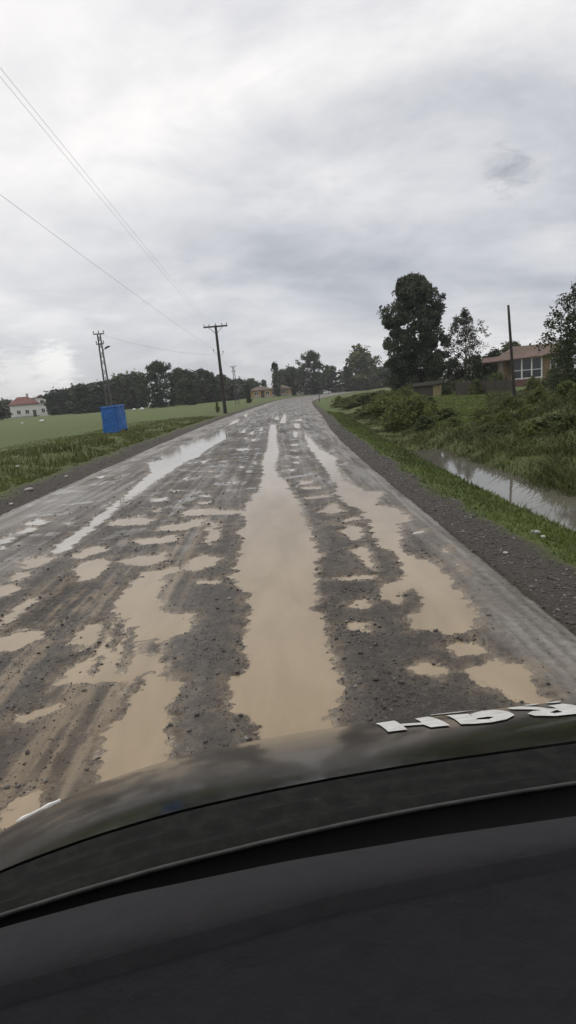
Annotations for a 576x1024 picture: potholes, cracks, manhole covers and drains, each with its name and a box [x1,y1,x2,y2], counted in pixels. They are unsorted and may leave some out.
pothole [176,506,245,518]
pothole [65,543,115,559]
pothole [0,625,54,653]
pothole [214,424,357,742]
pothole [302,432,487,639]
pothole [44,429,229,555]
pothole [395,655,458,683]
pothole [113,547,176,567]
pothole [39,564,207,790]
pothole [455,650,560,705]
